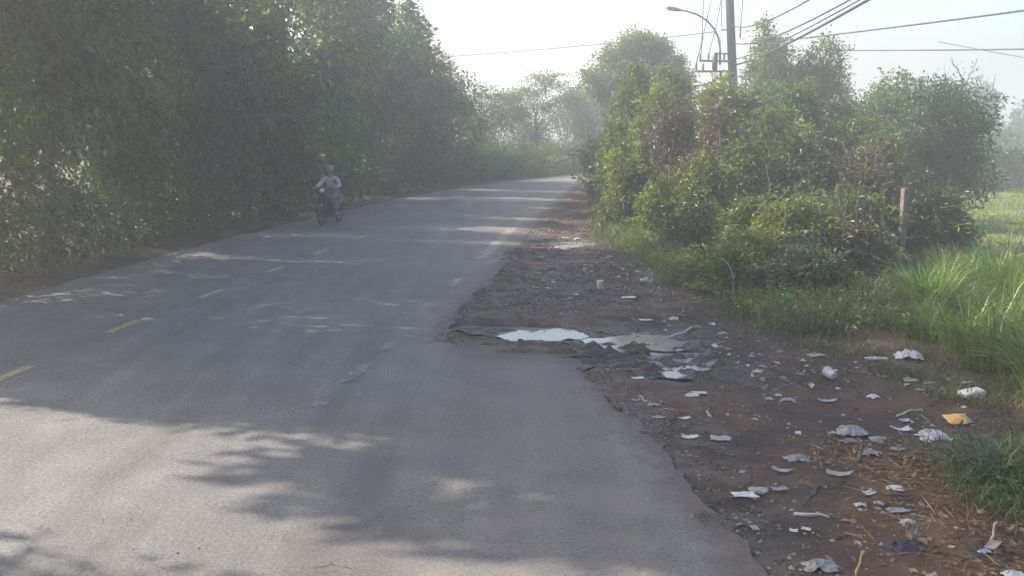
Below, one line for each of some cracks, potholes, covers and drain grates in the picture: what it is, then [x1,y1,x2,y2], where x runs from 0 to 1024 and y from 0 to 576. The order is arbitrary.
pothole [443,317,589,341]
pothole [562,332,718,380]
